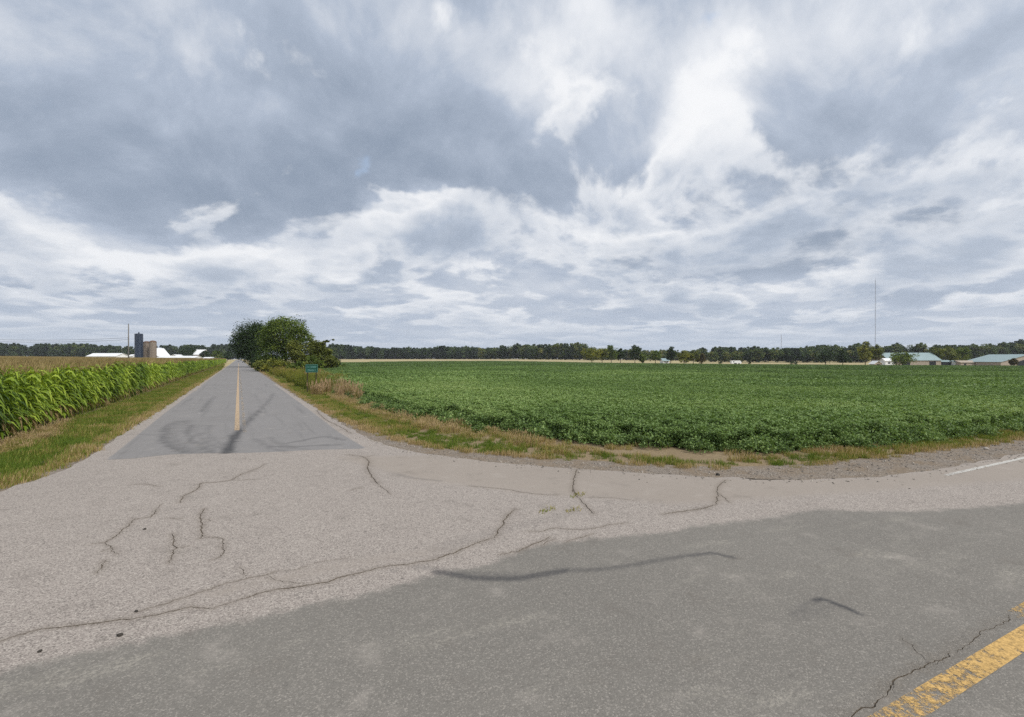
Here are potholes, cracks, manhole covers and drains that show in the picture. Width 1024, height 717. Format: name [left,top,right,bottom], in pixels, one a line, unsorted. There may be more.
crack [667,480,729,514]
crack [503,470,622,554]
crack [851,617,1011,717]
crack [96,471,250,572]
